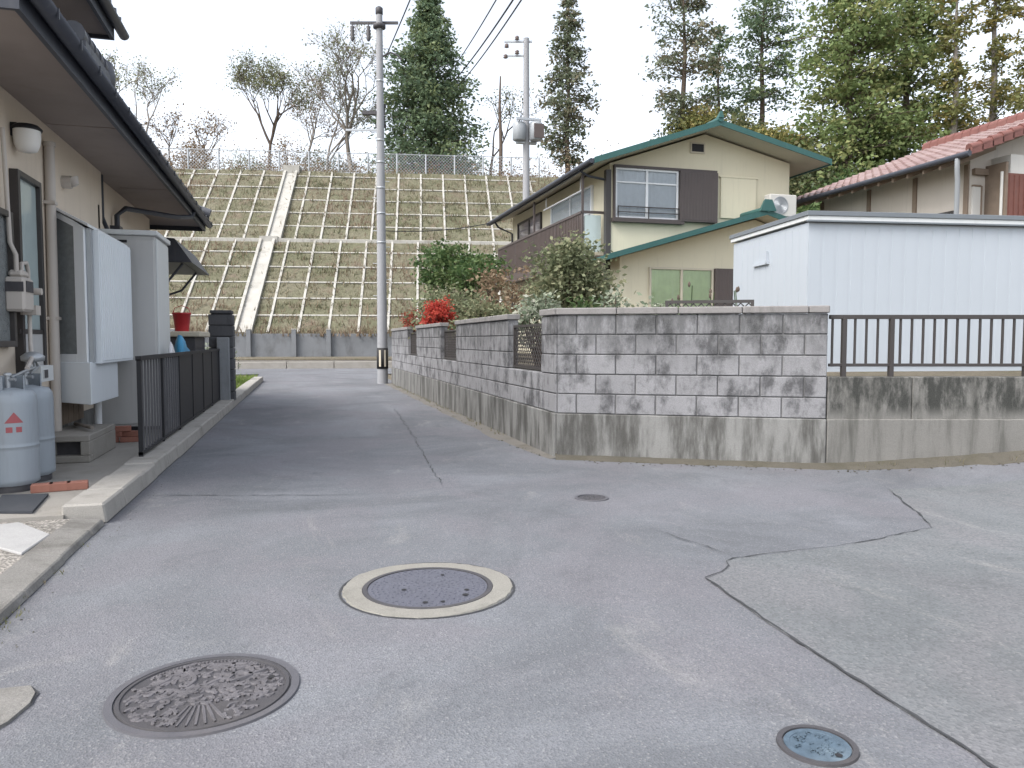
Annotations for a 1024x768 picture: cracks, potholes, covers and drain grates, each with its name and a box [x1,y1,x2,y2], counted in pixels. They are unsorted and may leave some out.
utility cover [575,494,609,502]
manhole cover [339,562,515,619]
crack [650,489,998,768]
manhole cover [102,653,300,739]
utility cover [776,724,860,768]
